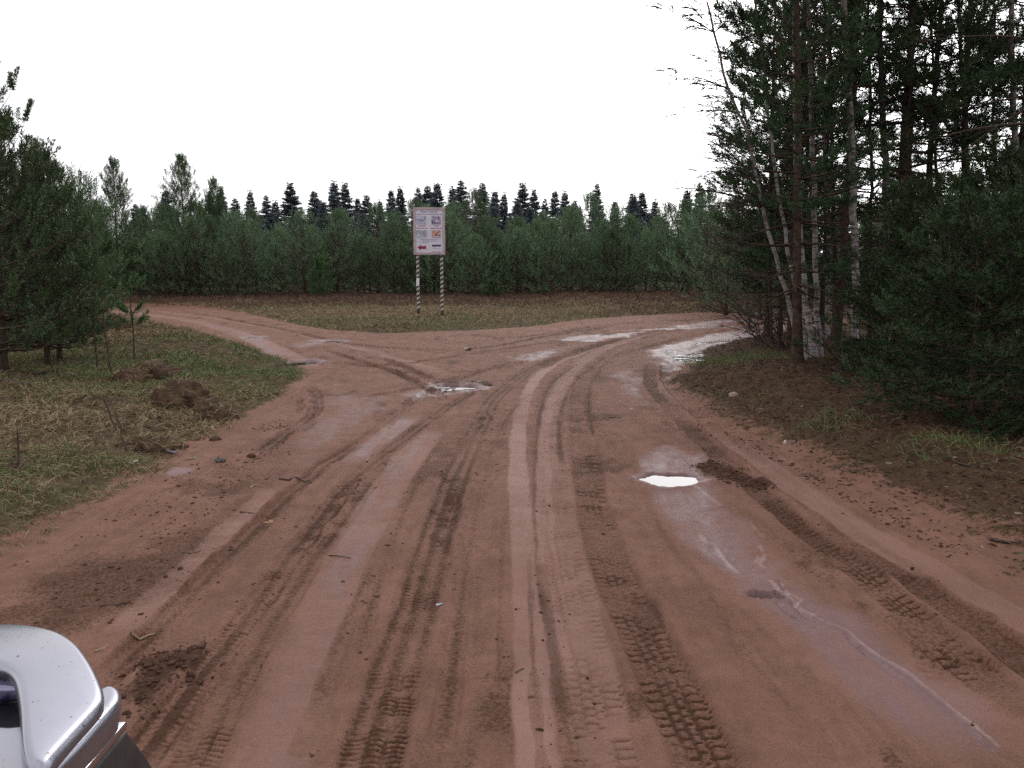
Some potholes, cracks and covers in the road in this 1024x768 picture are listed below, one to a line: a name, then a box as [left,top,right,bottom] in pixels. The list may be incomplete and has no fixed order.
pothole [427,381,485,392]
pothole [738,588,790,600]
pothole [630,470,710,488]
